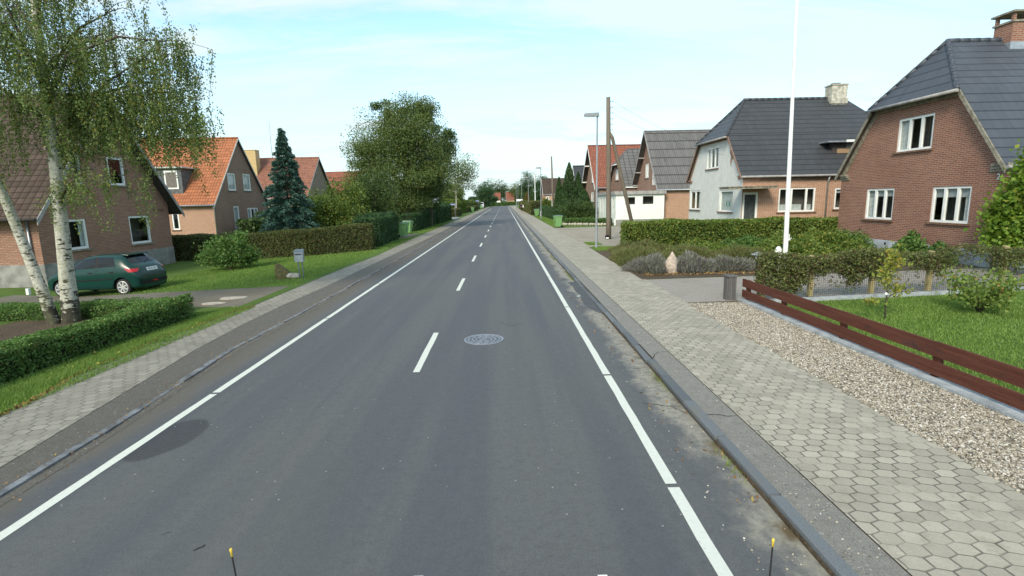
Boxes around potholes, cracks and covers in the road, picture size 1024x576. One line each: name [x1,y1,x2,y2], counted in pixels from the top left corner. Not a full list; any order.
manhole cover [464,334,504,345]
